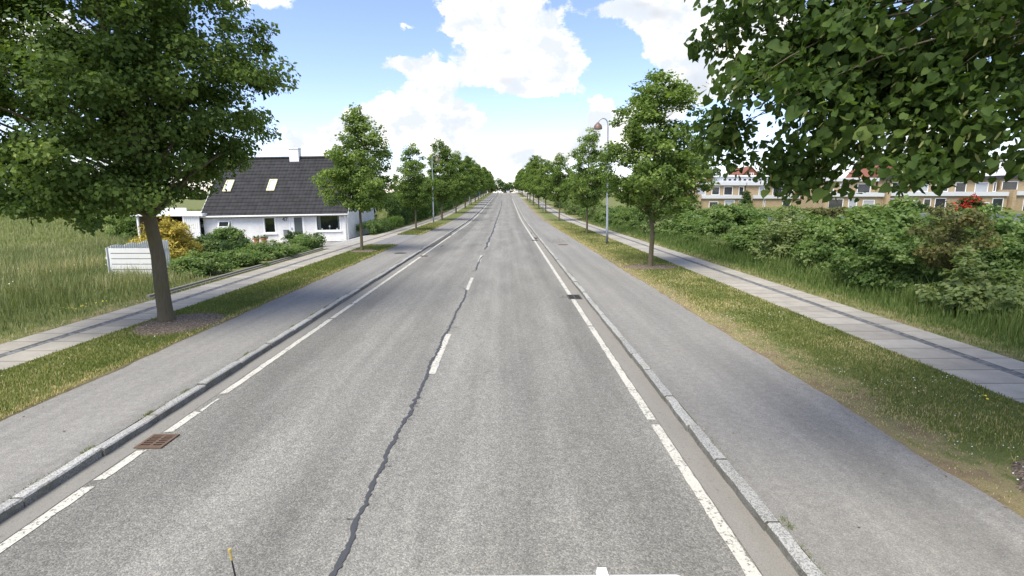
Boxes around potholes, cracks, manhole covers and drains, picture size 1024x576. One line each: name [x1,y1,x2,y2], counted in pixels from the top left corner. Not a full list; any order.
drain grate [133,434,180,449]
crack [475,202,502,271]
